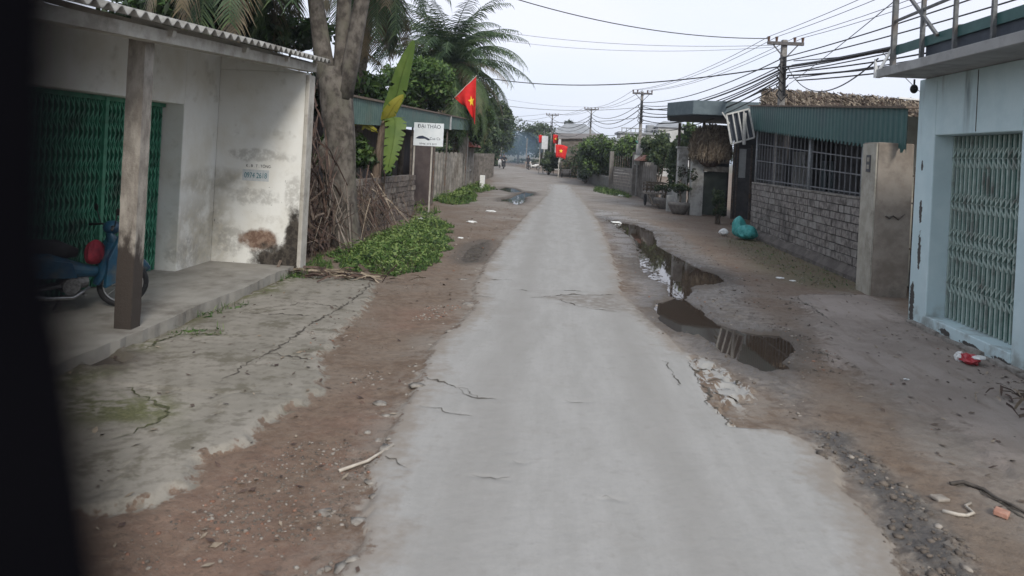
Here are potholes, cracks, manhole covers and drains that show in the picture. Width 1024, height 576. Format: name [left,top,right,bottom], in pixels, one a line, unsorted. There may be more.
pothole [602,217,726,298]
crack [663,360,782,430]
pothole [653,298,798,370]
crack [120,387,170,437]
crack [424,376,495,416]
crack [220,275,373,382]
crack [146,333,218,349]
